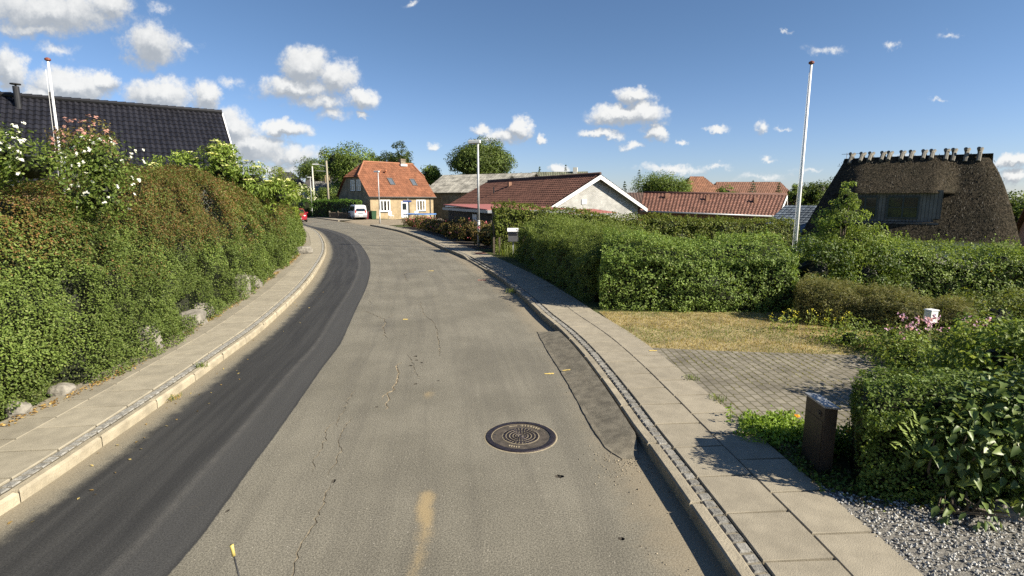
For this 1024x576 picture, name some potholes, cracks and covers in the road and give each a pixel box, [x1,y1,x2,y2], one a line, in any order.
crack [291,392,354,576]
manhole cover [484,422,558,454]
crack [381,356,421,409]
